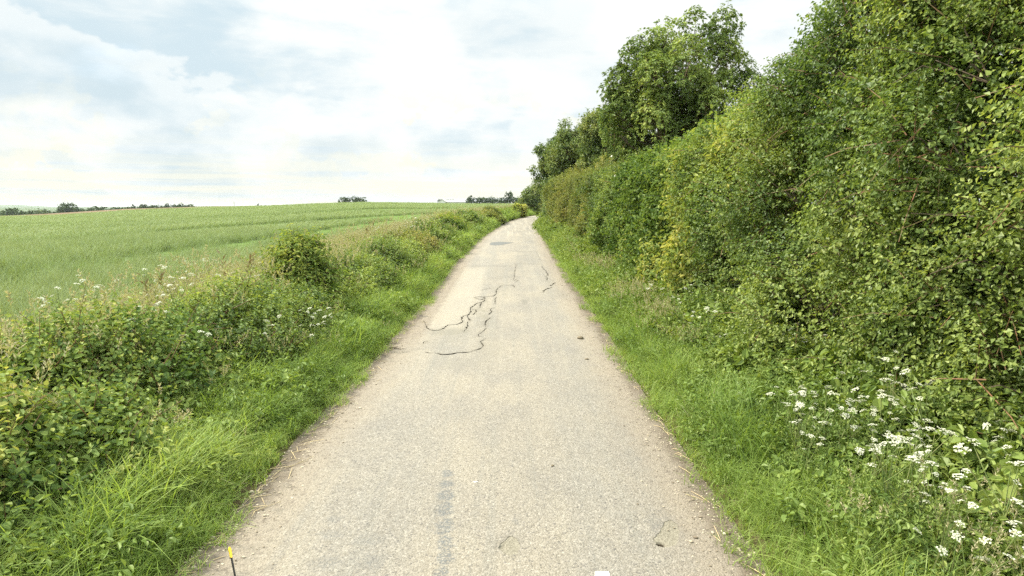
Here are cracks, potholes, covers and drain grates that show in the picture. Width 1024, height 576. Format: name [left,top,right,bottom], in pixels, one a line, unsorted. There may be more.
crack [423,267,516,355]
